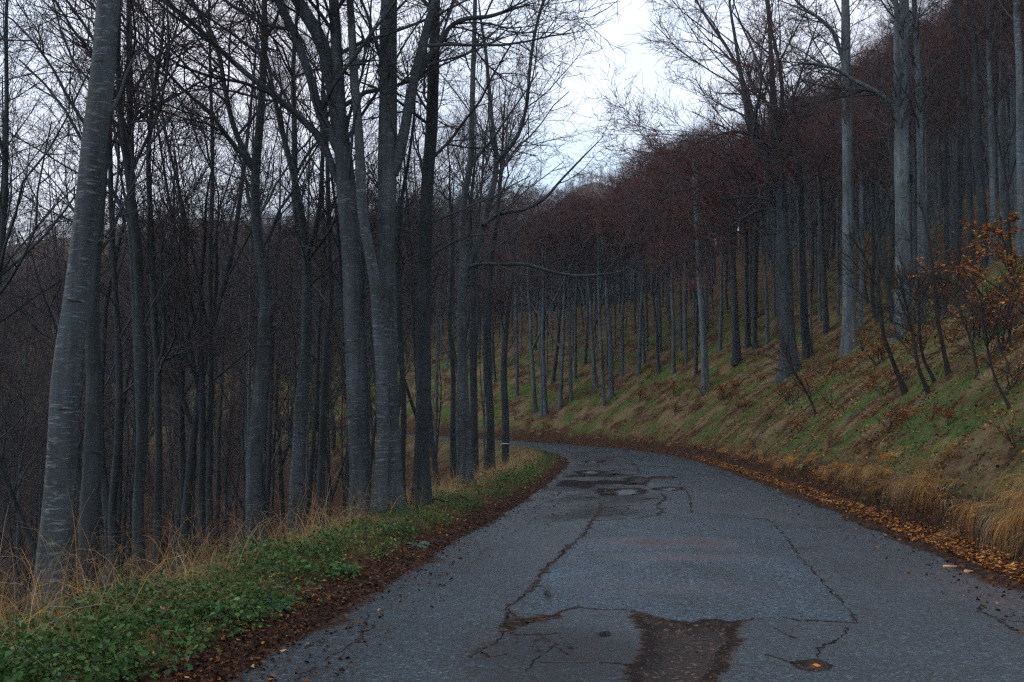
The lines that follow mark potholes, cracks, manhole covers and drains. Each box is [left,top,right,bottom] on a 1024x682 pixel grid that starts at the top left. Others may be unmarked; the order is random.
crack [467,606,649,673]
pothole [785,659,831,671]
pothole [610,488,643,496]
crack [976,604,1024,631]
crack [735,617,858,664]
